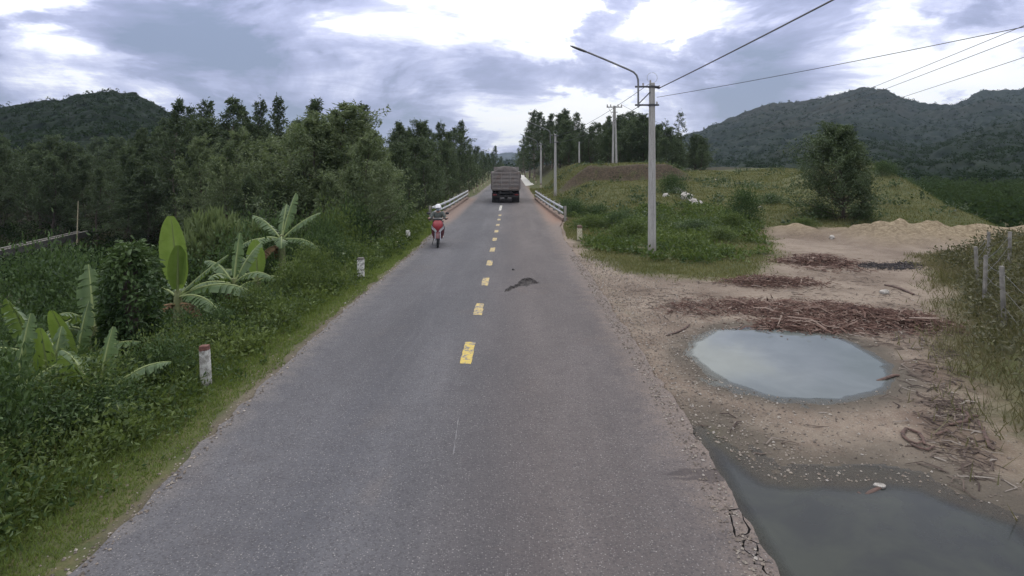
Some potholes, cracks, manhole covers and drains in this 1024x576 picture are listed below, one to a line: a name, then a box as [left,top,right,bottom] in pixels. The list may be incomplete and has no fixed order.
crack [729,508,774,576]
pothole [504,277,539,292]
